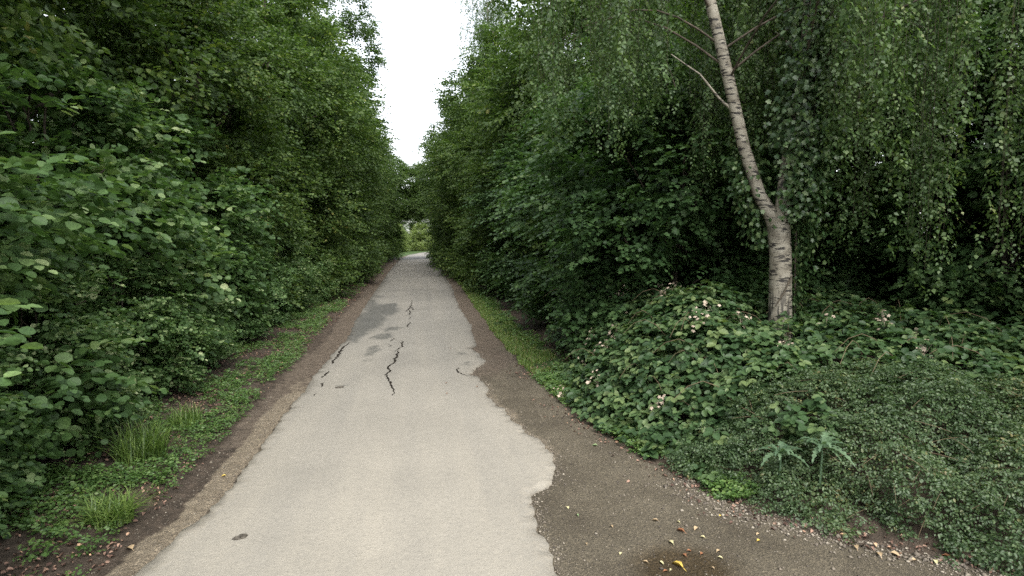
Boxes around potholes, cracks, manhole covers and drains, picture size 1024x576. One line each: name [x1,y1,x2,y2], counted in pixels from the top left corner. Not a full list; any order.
crack [314,343,349,395]
crack [385,301,415,395]
